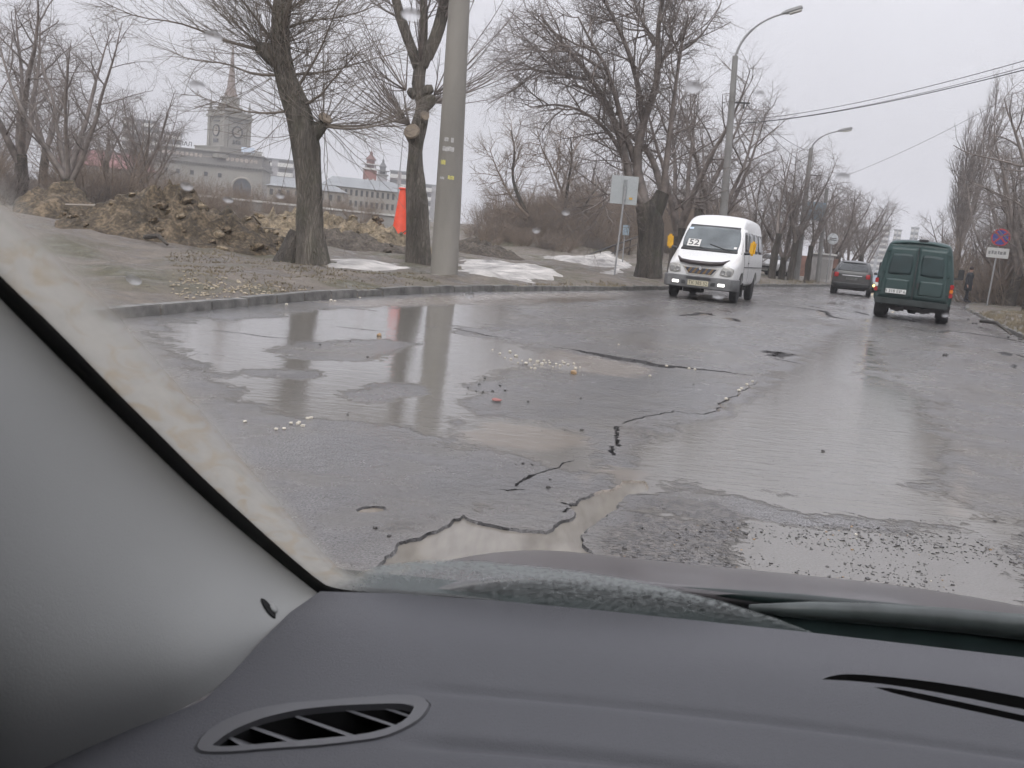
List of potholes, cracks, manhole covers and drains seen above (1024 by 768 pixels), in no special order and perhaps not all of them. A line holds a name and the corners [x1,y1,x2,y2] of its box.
pothole [377,480,649,573]
crack [556,347,760,456]
crack [500,460,574,512]
pothole [757,350,799,359]
crack [787,306,869,320]
